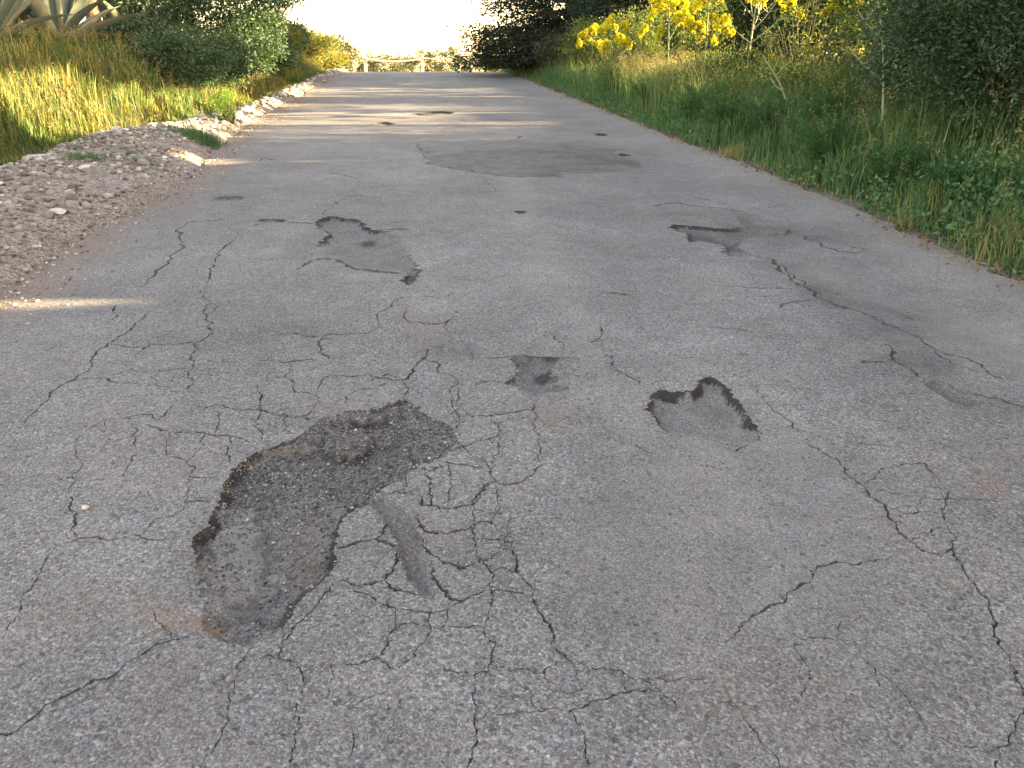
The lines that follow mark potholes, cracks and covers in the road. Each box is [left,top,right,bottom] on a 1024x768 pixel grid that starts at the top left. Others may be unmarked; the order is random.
pothole [190,399,459,646]
pothole [399,276,421,286]
crack [729,699,781,768]
crack [2,232,710,768]
pothole [295,216,423,277]
pothole [504,355,570,398]
crack [137,219,223,290]
pothole [643,376,763,448]
crack [729,256,1024,408]
pothole [667,215,791,247]
crack [794,233,869,254]
crack [746,381,1024,767]
